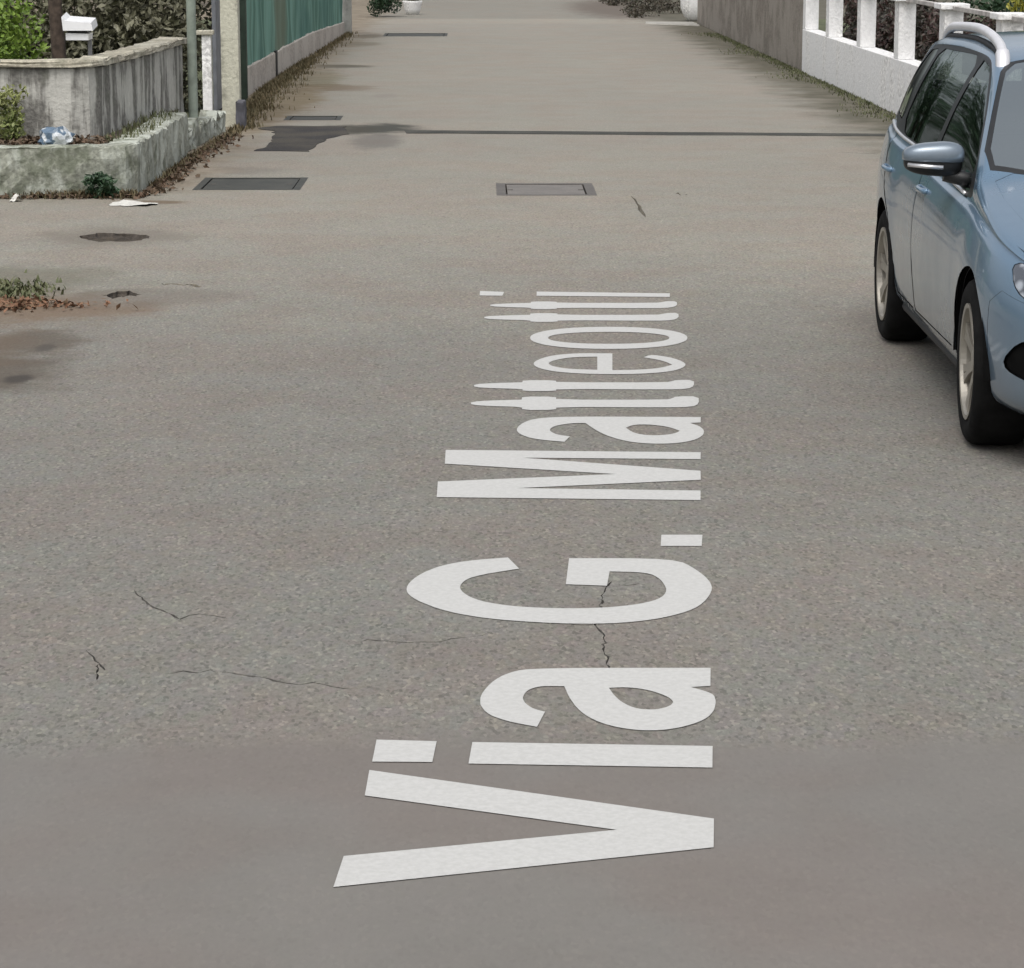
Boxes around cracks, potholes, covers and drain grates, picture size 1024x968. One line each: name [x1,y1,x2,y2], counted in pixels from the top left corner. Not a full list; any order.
crack [171,670,347,689]
pothole [79,233,150,242]
crack [86,650,105,682]
crack [135,591,224,620]
crack [631,196,646,217]
manhole cover [496,183,597,196]
crack [361,633,487,643]
pothole [102,290,140,299]
manhole cover [192,177,308,190]
crack [563,581,636,668]
